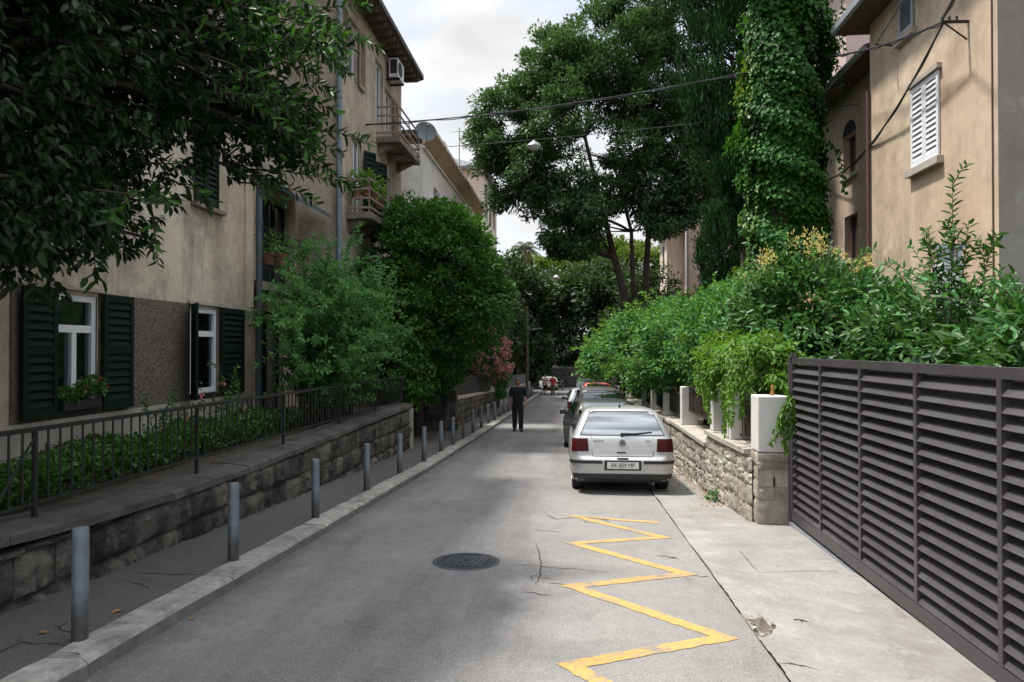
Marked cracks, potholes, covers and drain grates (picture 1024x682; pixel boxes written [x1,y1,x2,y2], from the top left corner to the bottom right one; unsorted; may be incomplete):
pothole [744,615,779,637]
crack [516,514,610,595]
crack [0,621,81,655]
manhole cover [433,553,500,570]
